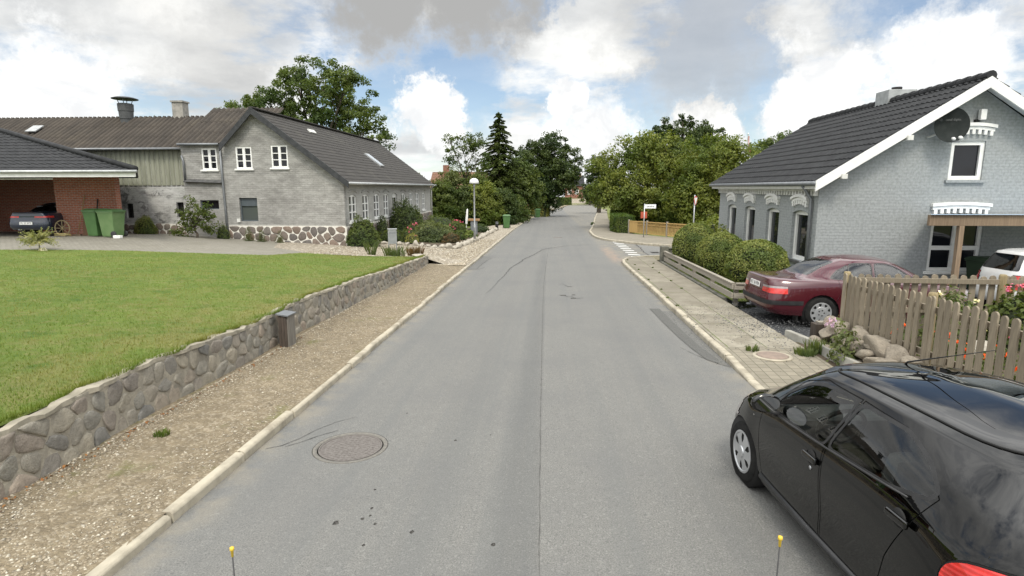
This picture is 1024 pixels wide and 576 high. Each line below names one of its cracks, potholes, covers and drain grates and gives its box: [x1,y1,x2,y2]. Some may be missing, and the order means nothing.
crack [469,244,589,291]
crack [266,417,354,449]
manhole cover [752,351,793,362]
manhole cover [312,432,388,464]
